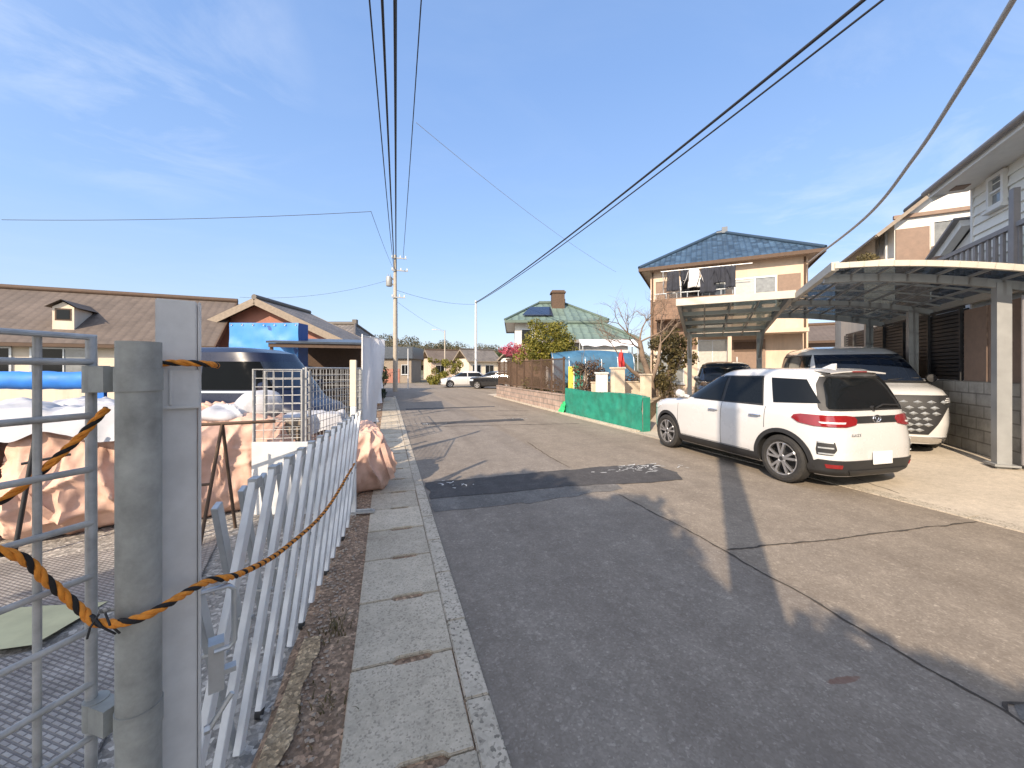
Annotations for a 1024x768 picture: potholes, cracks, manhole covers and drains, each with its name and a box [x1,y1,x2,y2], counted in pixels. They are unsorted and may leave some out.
crack [727,521,977,550]
